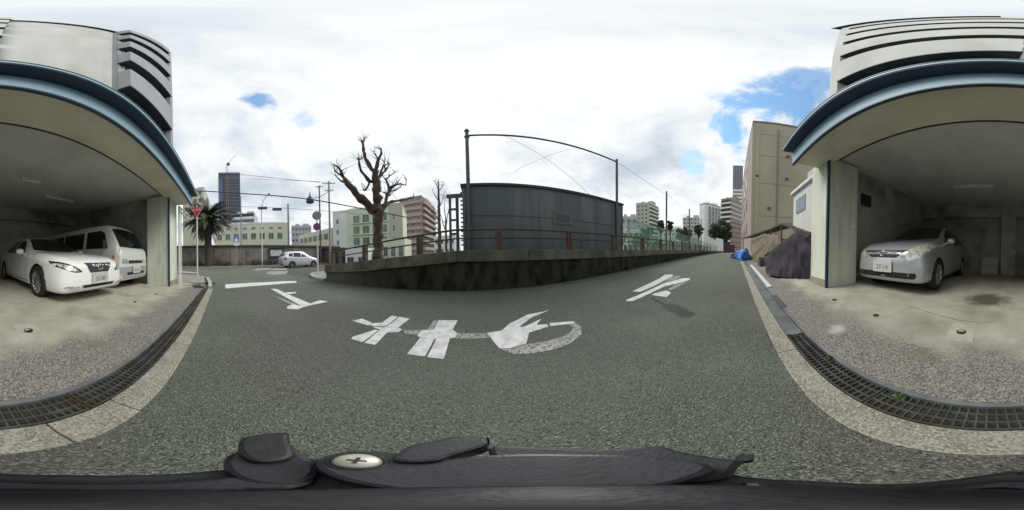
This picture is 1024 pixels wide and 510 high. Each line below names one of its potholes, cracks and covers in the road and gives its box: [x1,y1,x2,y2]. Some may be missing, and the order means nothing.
drain grate [788,334,886,403]
drain grate [67,344,169,409]
drain grate [152,317,190,348]
drain grate [179,303,199,319]
